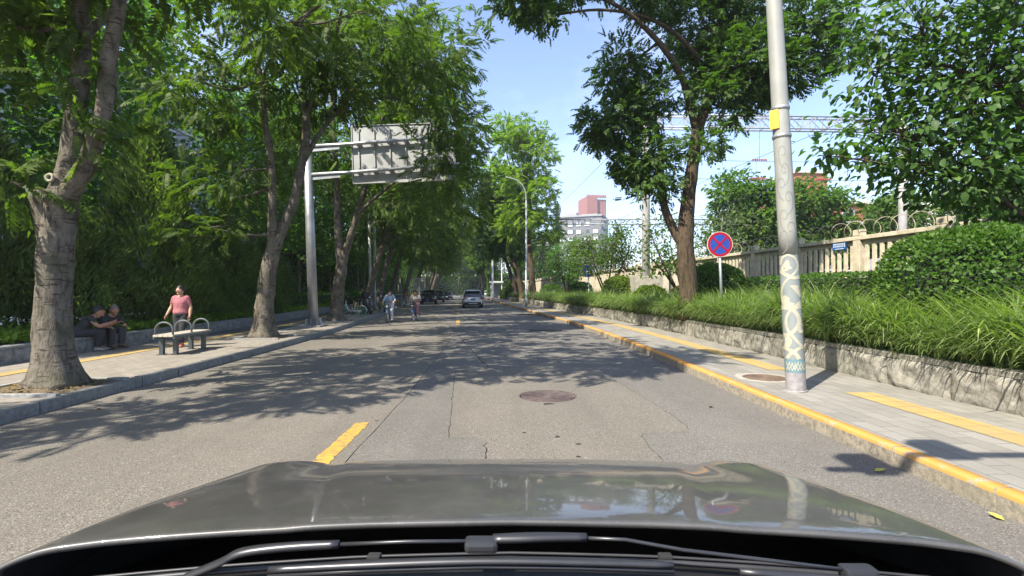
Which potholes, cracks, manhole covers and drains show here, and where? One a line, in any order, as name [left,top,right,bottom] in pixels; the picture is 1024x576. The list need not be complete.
manhole cover [519,391,577,402]
manhole cover [735,373,785,383]
